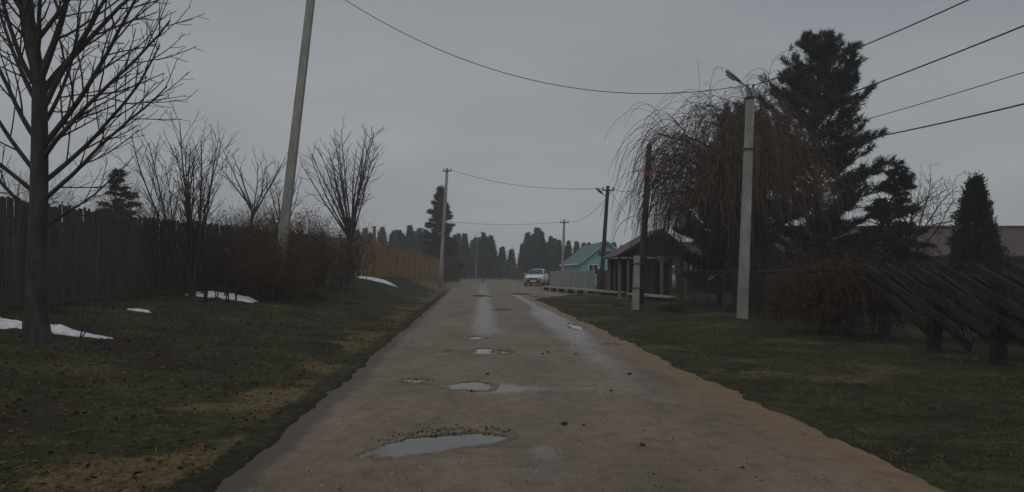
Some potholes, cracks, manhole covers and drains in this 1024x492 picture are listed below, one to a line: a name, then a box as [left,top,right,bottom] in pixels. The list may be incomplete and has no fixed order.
pothole [438,380,499,392]
pothole [348,424,520,461]
pothole [470,347,502,355]
